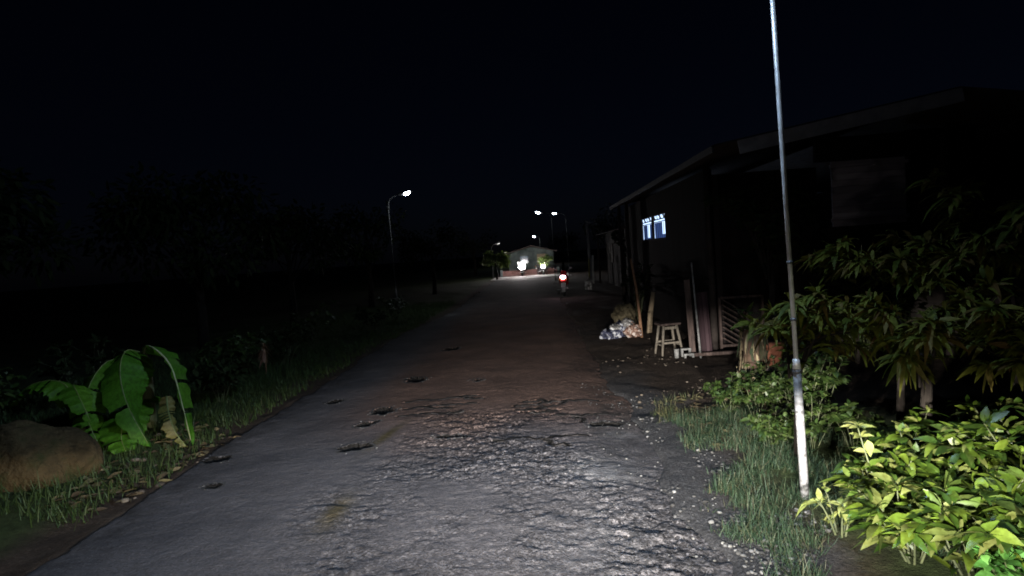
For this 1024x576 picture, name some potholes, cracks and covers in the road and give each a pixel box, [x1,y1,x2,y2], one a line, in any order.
crack [398,395,483,417]
pothole [334,441,376,453]
pothole [369,407,398,416]
crack [493,399,623,447]
pothole [351,420,382,428]
pothole [198,455,235,465]
pothole [201,482,226,490]
